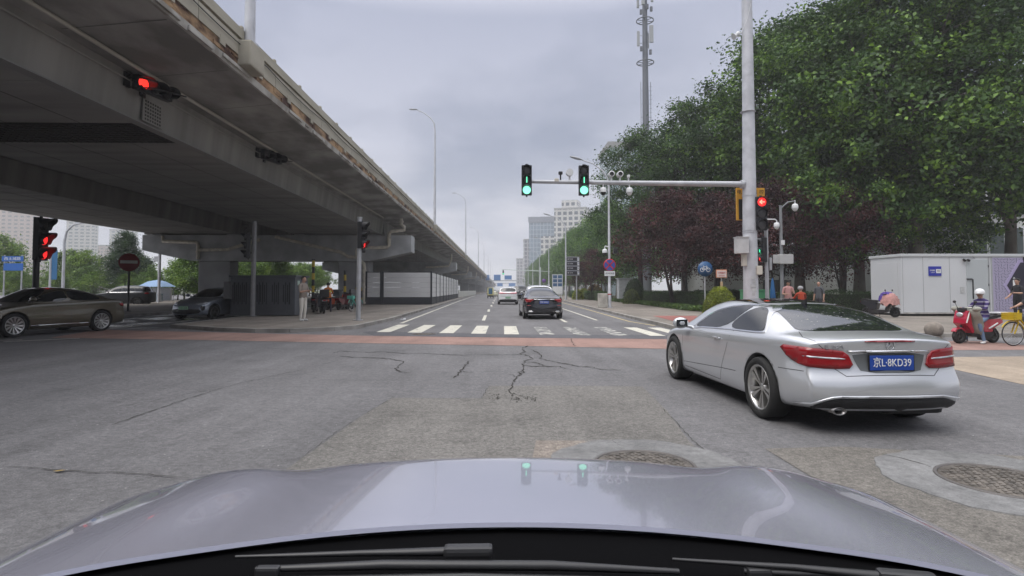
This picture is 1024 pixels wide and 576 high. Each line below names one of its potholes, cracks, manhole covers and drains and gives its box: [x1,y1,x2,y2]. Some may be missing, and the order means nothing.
crack [112,346,614,425]
manhole cover [551,439,742,468]
crack [10,466,189,478]
